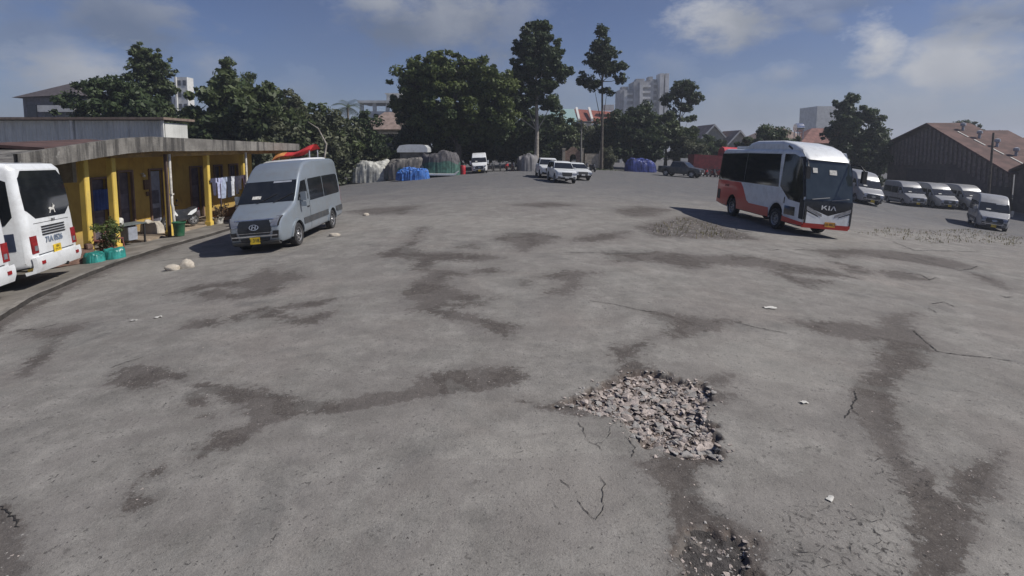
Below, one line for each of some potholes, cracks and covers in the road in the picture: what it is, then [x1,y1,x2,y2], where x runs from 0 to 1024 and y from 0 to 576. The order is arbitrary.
crack [514,424,636,519]
pothole [665,521,769,576]
crack [1,506,20,527]
crack [771,500,915,575]
pothole [553,370,734,461]
